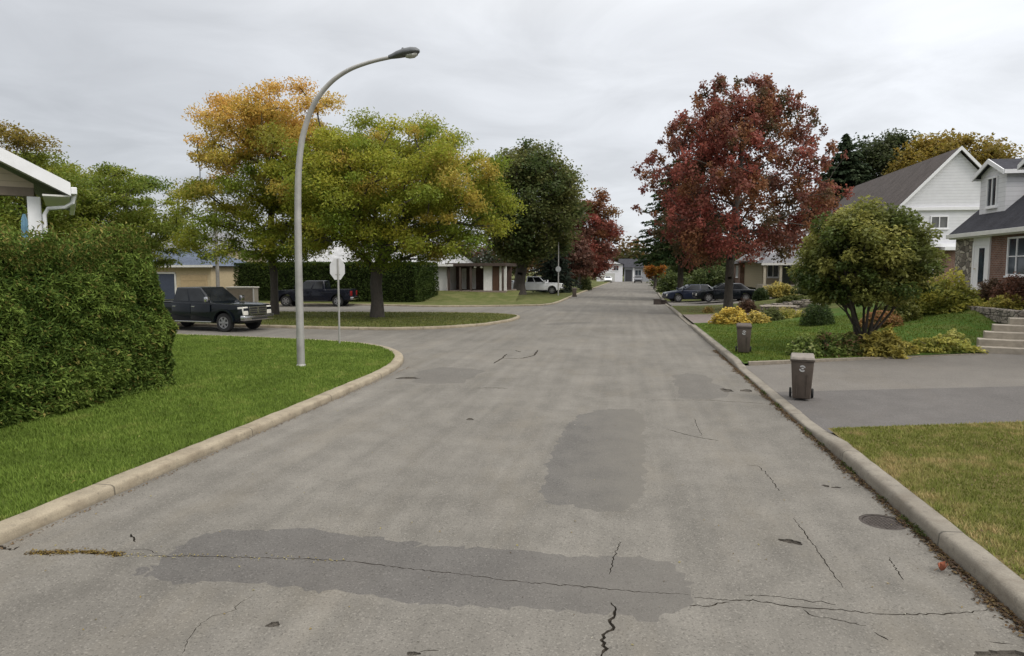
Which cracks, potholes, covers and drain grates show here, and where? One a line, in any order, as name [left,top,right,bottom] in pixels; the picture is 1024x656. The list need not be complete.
crack [751,465,847,590]
crack [0,543,988,656]
manhole cover [859,514,908,530]
